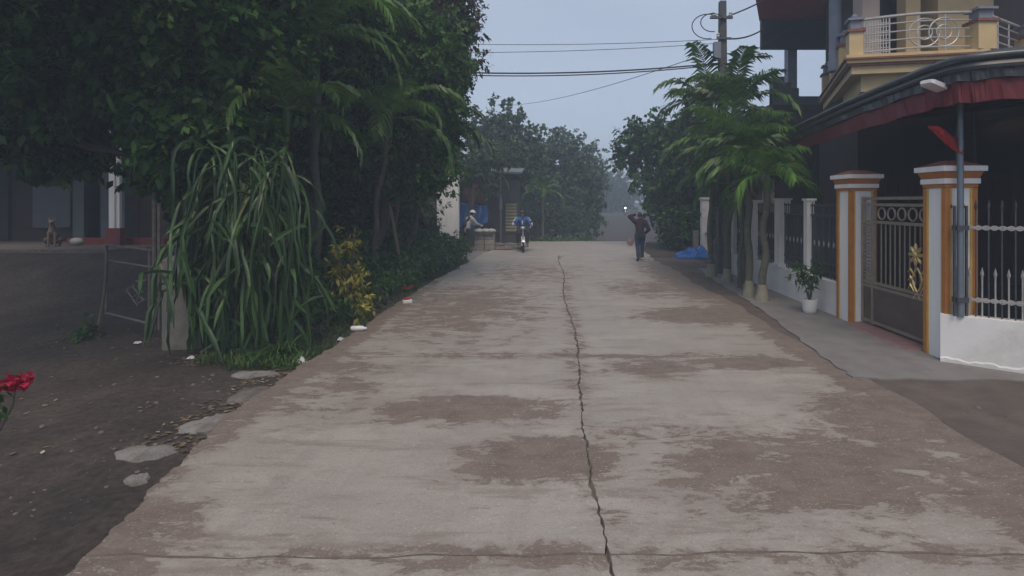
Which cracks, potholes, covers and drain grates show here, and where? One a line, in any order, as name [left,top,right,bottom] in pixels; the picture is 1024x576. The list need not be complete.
crack [86,255,1024,576]
